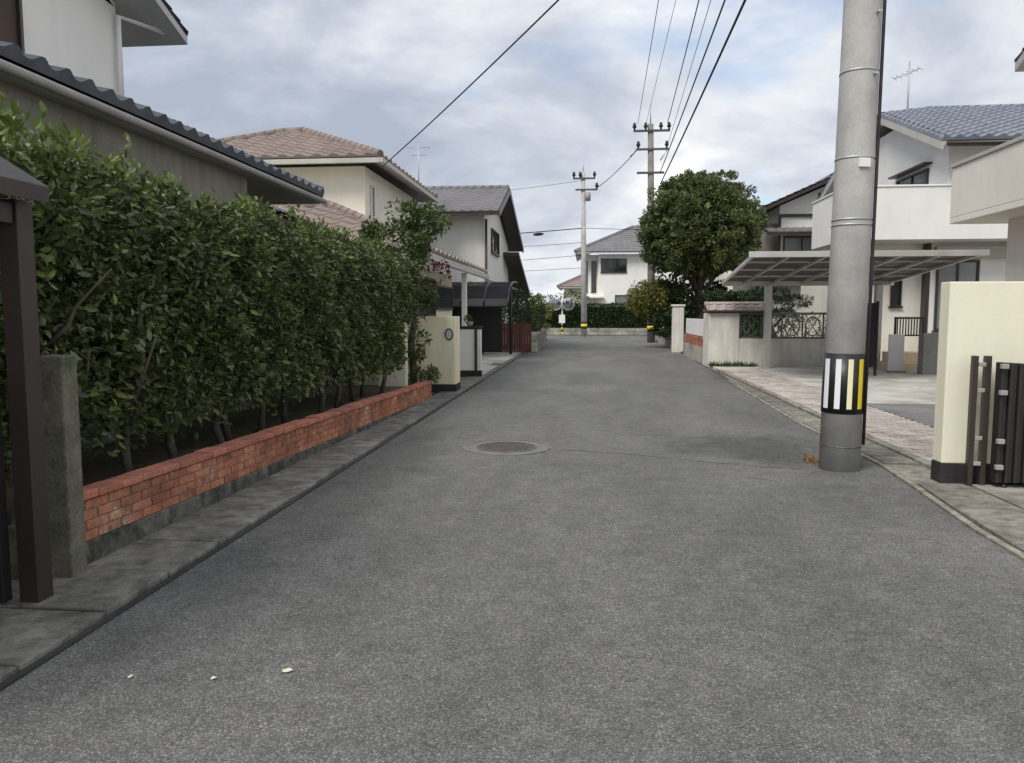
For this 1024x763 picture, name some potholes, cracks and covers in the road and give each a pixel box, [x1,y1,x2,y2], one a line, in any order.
manhole cover [463,439,550,456]
